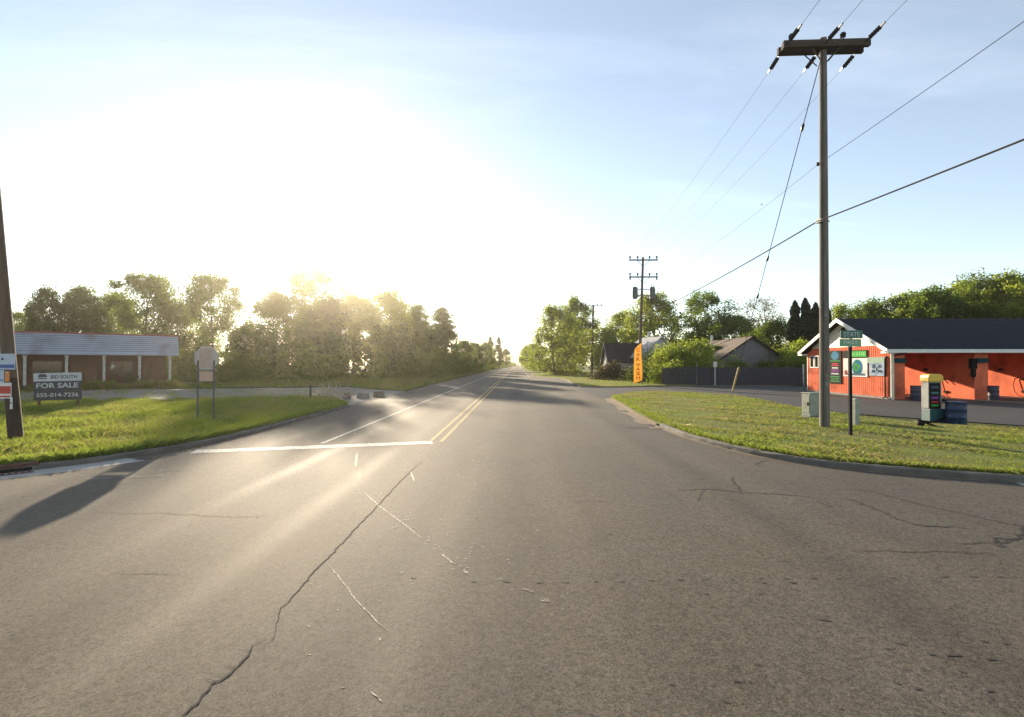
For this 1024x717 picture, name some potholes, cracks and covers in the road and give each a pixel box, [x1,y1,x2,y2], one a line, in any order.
crack [182,465,417,717]
crack [671,460,1024,554]
